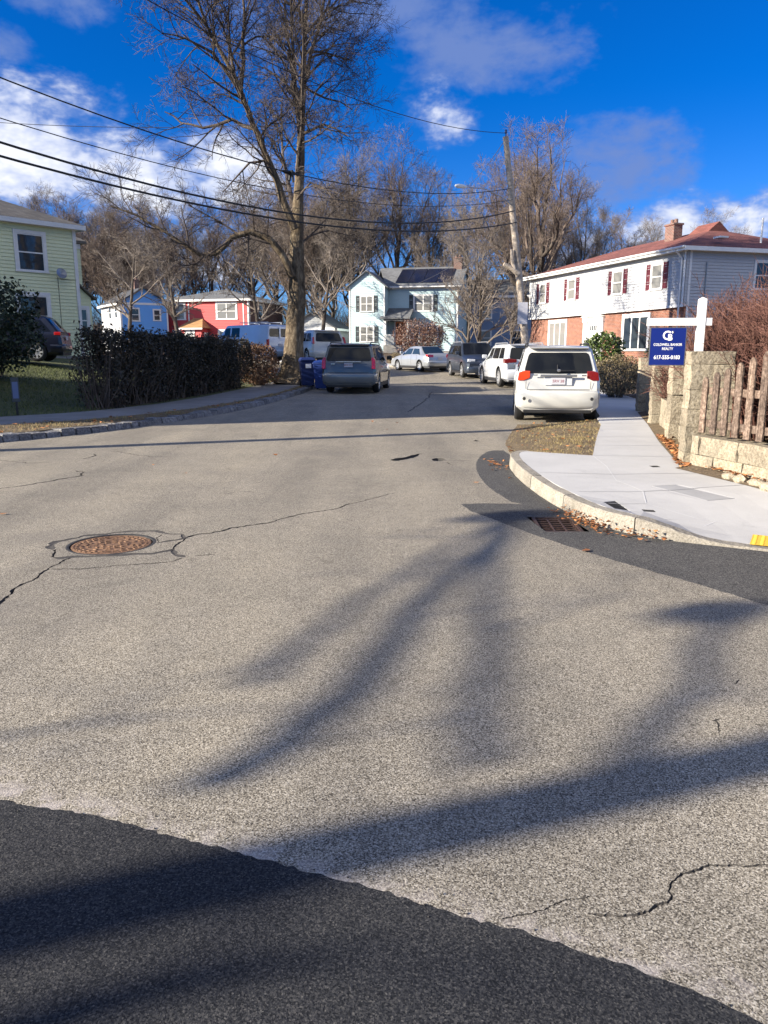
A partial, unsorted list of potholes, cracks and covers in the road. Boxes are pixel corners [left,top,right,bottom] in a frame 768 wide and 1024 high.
crack [0,493,393,604]
drain grate [530,517,584,532]
crack [0,454,96,489]
crack [502,864,768,919]
manhole cover [65,534,156,556]
